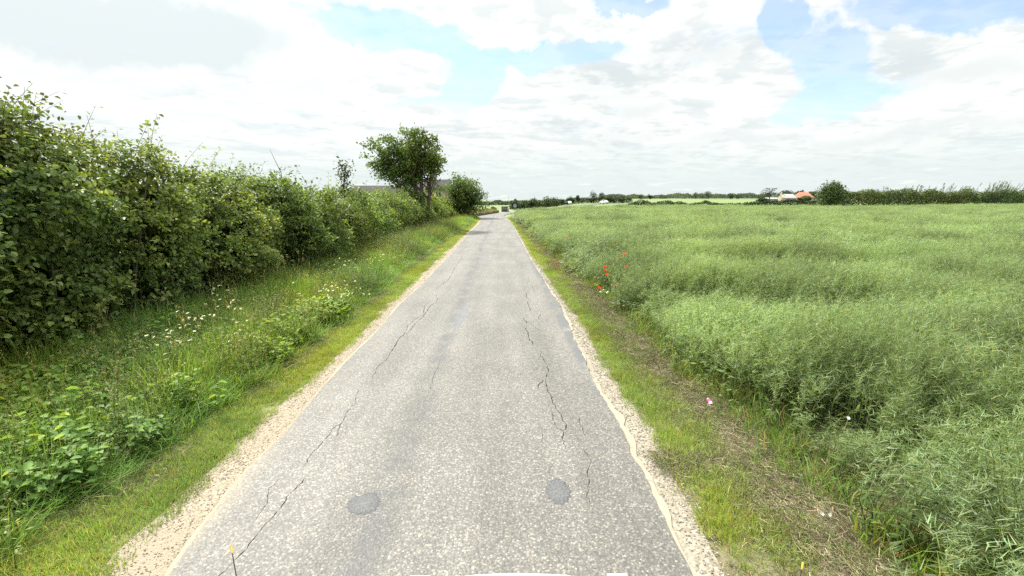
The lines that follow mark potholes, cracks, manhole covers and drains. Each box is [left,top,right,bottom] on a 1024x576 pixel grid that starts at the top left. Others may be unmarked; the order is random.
crack [219,392,358,576]
crack [523,279,591,507]
crack [374,256,462,374]
